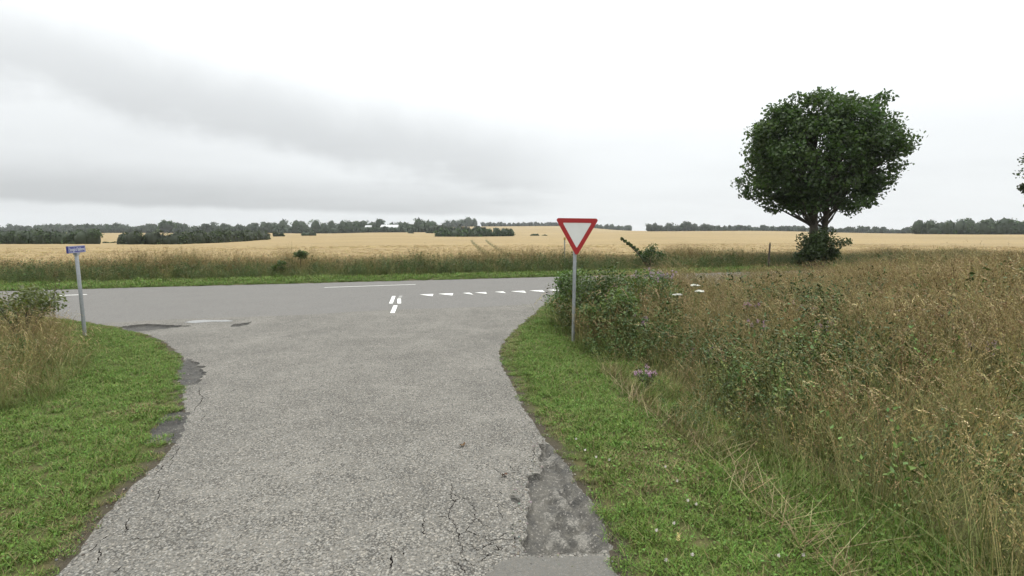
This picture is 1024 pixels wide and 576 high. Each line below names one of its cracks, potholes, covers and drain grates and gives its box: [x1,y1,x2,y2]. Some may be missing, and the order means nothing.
crack [422,480,523,573]
crack [87,518,165,573]
